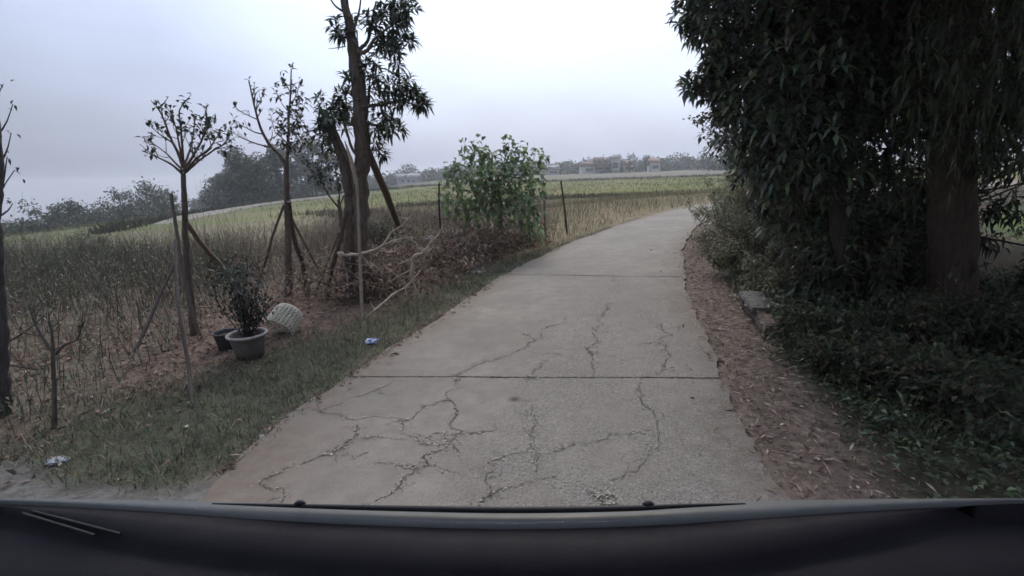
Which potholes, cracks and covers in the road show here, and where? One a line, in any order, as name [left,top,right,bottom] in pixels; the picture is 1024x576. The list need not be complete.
crack [250,373,665,506]
crack [457,318,565,383]
crack [574,302,613,376]
crack [645,321,672,375]
